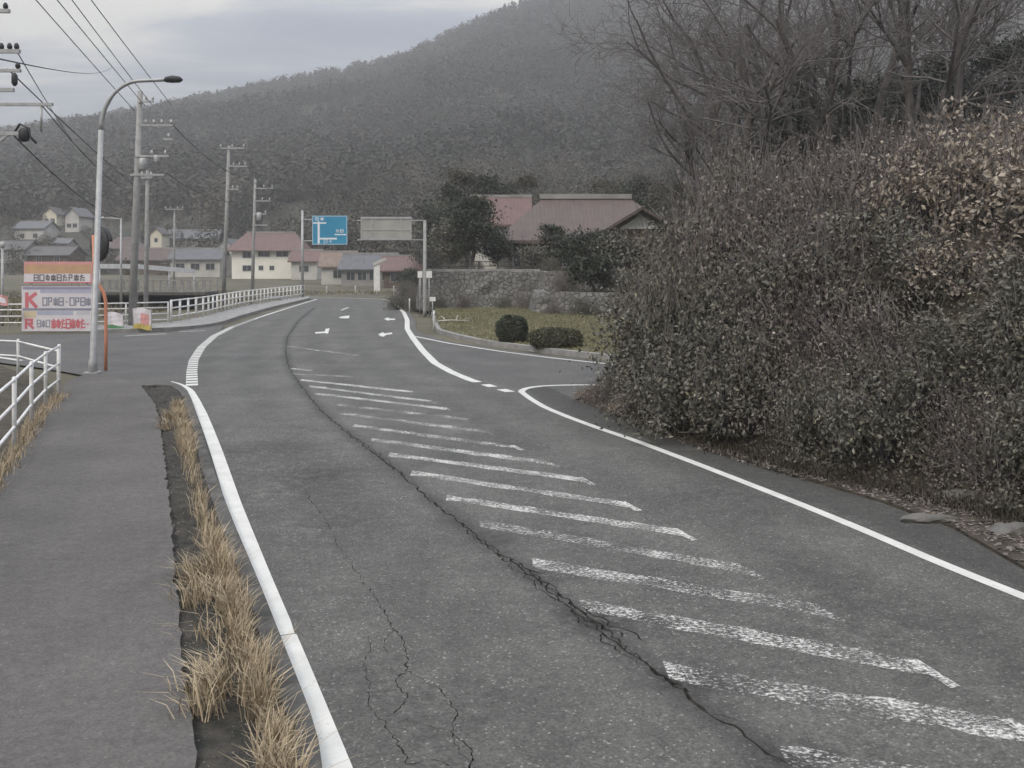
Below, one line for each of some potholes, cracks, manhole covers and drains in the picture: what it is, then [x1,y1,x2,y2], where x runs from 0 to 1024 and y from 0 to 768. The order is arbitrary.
crack [285,315,787,763]
